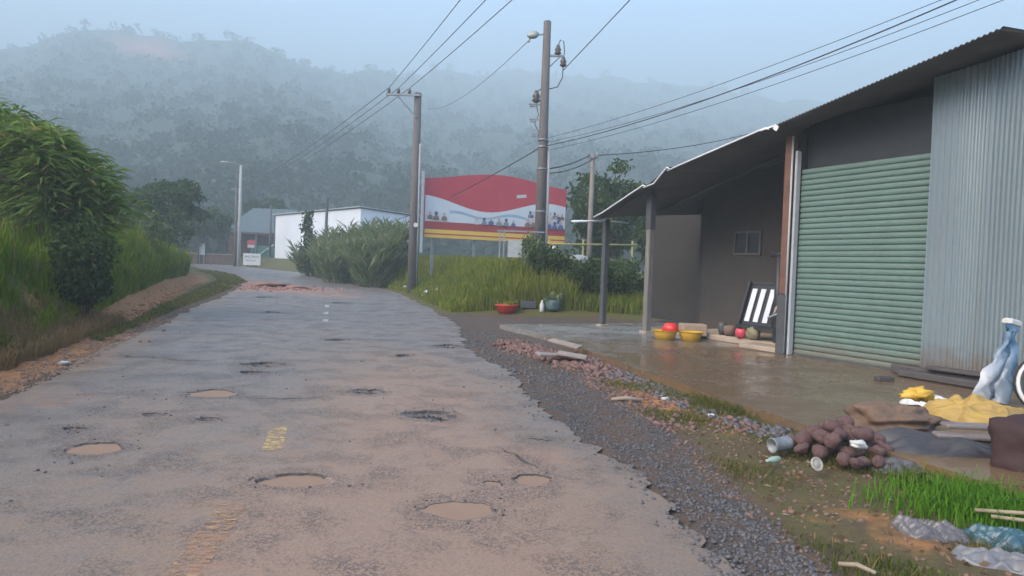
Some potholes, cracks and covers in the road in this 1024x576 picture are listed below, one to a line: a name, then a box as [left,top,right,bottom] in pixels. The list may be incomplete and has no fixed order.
pothole [179,387,243,399]
pothole [236,470,363,493]
pothole [378,408,457,422]
pothole [501,471,552,487]
pothole [407,494,516,524]
pothole [49,437,139,458]
pothole [237,361,295,369]
crack [503,438,555,469]
